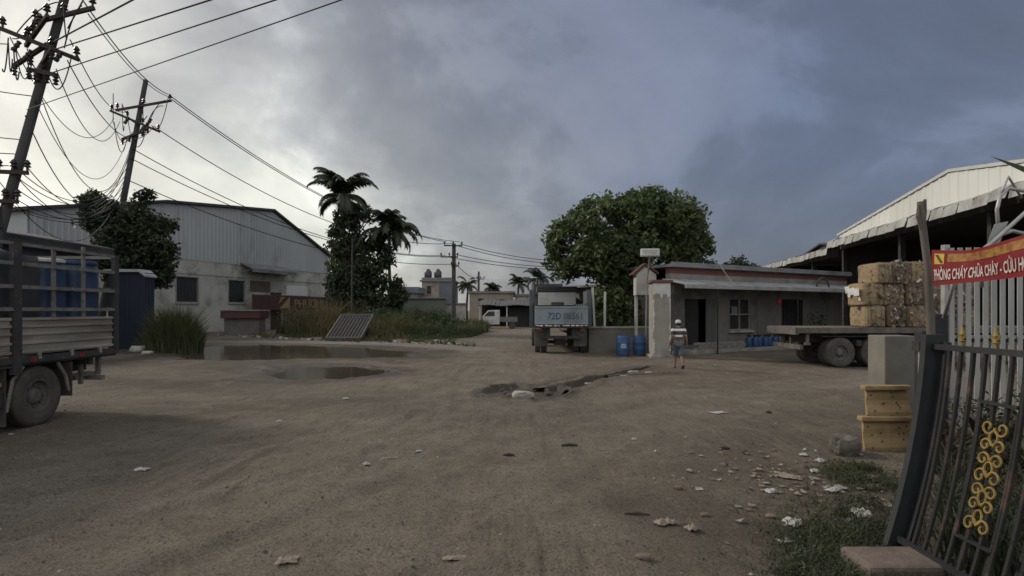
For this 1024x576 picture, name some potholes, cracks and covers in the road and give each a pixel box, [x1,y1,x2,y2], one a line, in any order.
pothole [470,381,587,403]
pothole [239,362,410,382]
pothole [122,342,452,364]
